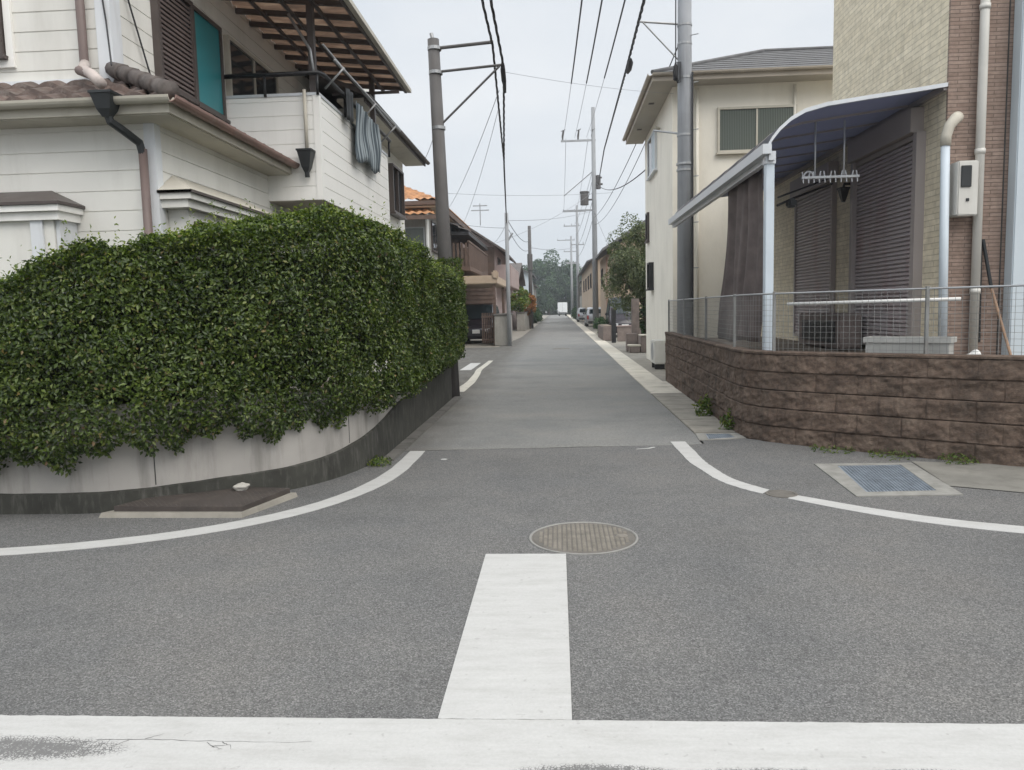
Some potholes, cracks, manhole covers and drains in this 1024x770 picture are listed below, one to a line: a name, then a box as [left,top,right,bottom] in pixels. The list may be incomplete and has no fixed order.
manhole cover [529,522,638,555]
utility cover [765,490,798,498]
drain grate [695,433,746,441]
drain grate [814,463,963,497]
crack [99,733,312,751]
